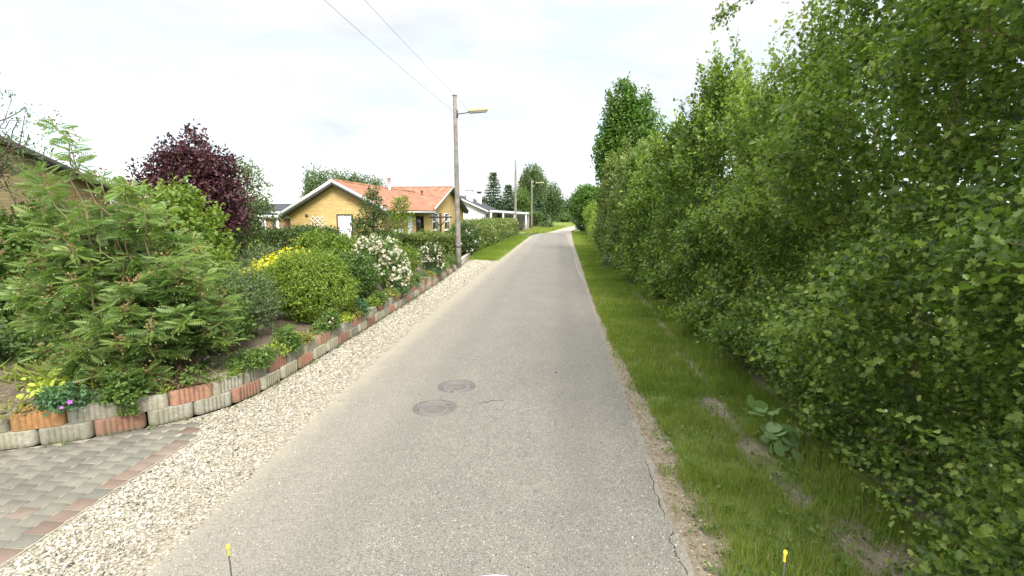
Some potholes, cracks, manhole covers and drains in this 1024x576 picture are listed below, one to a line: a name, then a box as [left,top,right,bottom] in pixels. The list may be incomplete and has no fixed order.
crack [644,460,688,574]
manhole cover [437,380,476,393]
manhole cover [412,400,456,417]
